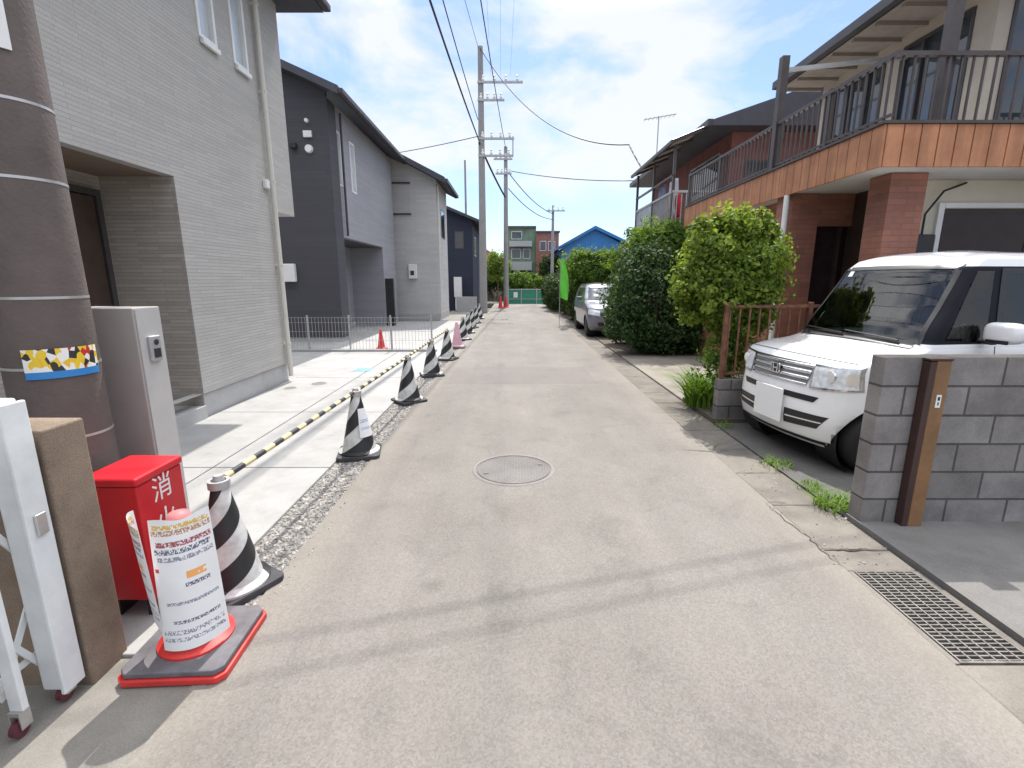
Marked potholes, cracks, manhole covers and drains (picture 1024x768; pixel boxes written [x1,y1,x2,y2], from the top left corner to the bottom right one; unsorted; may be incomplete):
crack [763,501,887,569]
drain grate [853,571,1024,666]
manhole cover [472,454,555,486]
